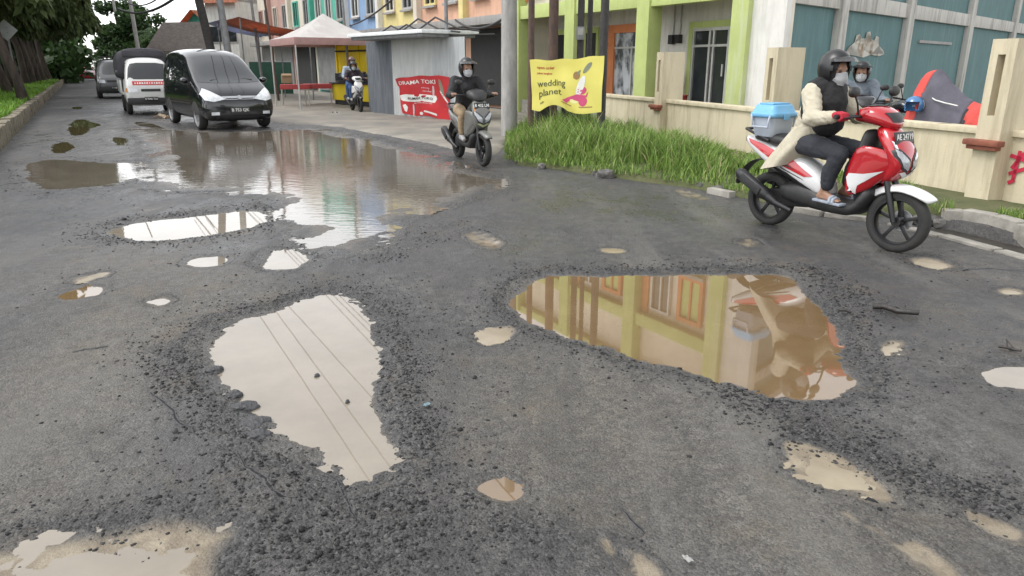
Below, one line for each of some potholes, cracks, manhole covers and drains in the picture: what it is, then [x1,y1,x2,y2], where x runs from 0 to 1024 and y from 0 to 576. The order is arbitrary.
pothole [123,127,512,259]
pothole [952,504,1024,547]
pothole [773,436,908,510]
pothole [95,206,278,243]
pothole [58,119,107,136]
pothole [964,358,1024,393]
pothole [468,470,531,504]
pothole [469,324,522,347]
pothole [44,283,114,302]
pothole [251,246,319,272]
pothole [178,253,236,268]
pothole [8,157,148,191]
